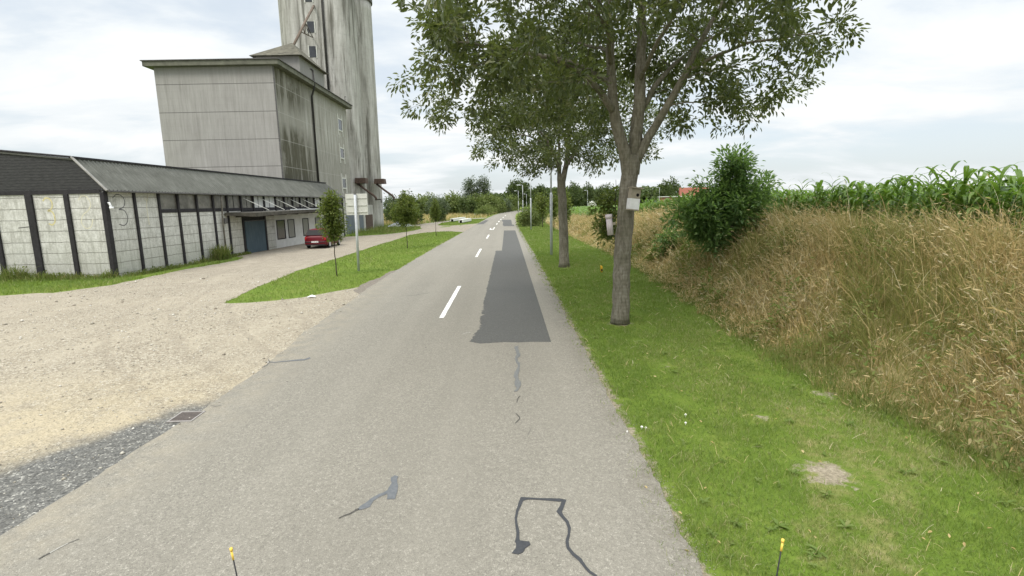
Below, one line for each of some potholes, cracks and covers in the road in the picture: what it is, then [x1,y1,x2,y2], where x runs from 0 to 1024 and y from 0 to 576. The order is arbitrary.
drain grate [166,411,206,423]
